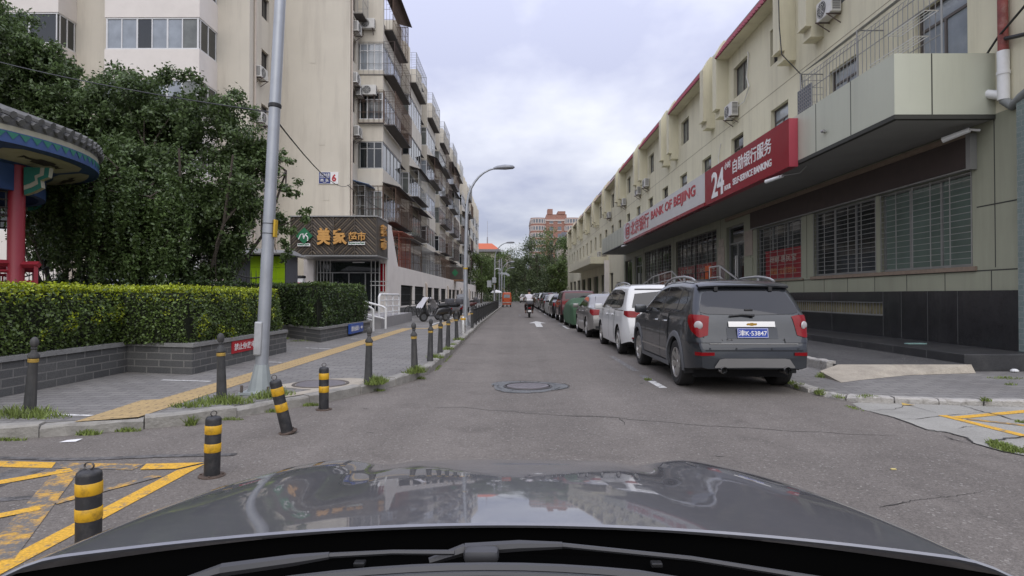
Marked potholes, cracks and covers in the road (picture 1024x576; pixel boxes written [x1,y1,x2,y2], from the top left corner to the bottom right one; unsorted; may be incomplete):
manhole cover [291,379,350,388]
crack [426,407,865,435]
manhole cover [491,381,569,393]
